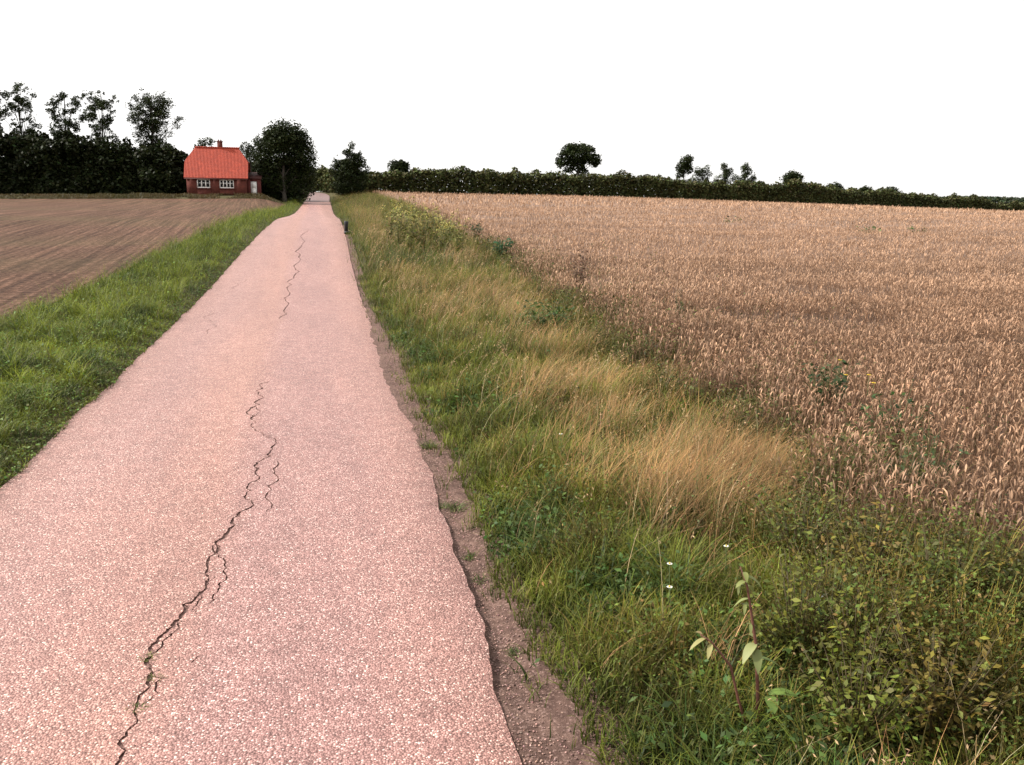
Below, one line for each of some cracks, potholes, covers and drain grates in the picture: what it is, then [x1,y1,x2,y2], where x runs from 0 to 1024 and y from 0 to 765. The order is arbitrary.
crack [279,232,306,319]
crack [115,387,277,765]
